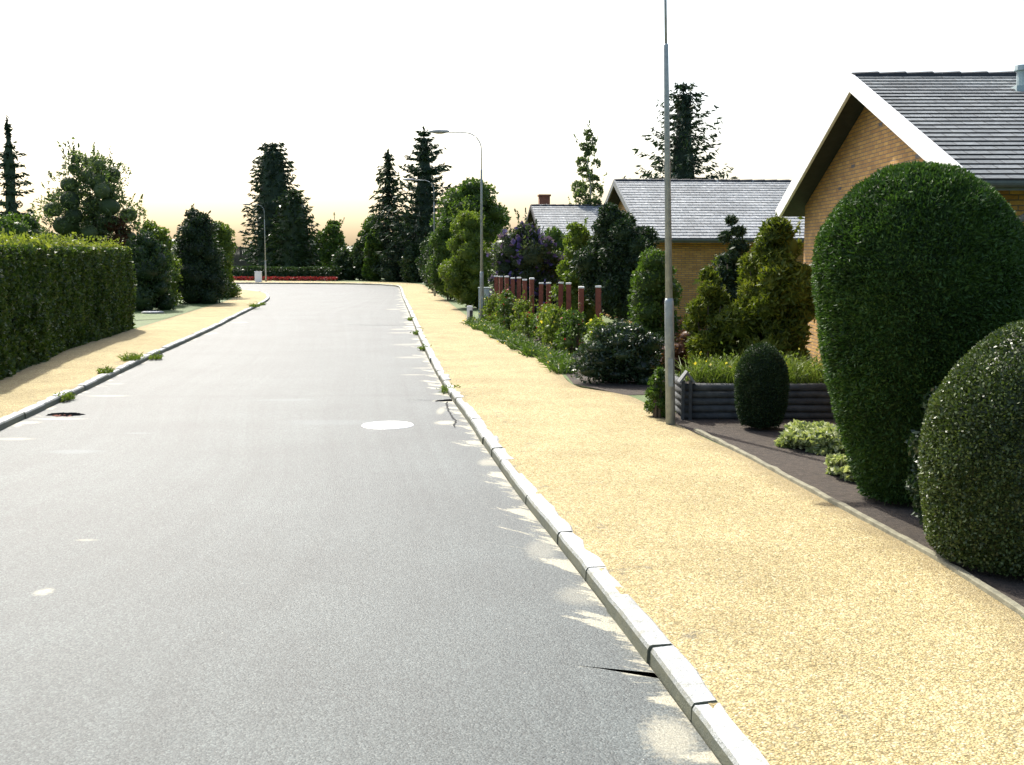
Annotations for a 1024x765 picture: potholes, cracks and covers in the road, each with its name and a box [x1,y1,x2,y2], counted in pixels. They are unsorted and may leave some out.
manhole cover [362,421,414,429]
